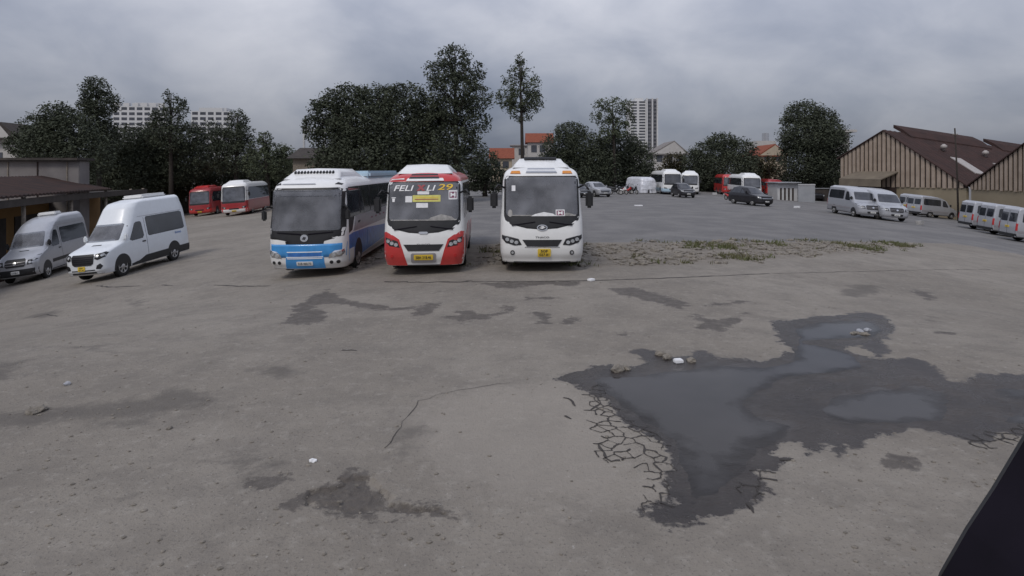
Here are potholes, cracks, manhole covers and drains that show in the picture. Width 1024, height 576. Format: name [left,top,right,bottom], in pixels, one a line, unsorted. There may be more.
crack [563,384,677,512]
crack [958,424,1024,449]
crack [385,382,511,448]
